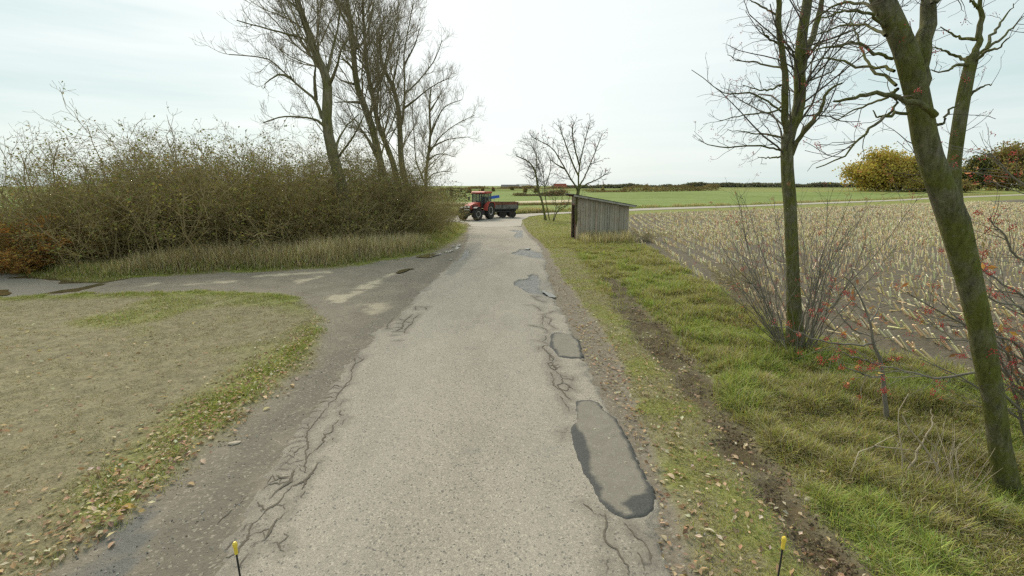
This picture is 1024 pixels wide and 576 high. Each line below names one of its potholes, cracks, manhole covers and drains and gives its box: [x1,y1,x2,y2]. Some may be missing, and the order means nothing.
crack [217,357,364,568]
crack [583,503,652,574]
crack [387,306,427,333]
crack [532,298,573,409]
